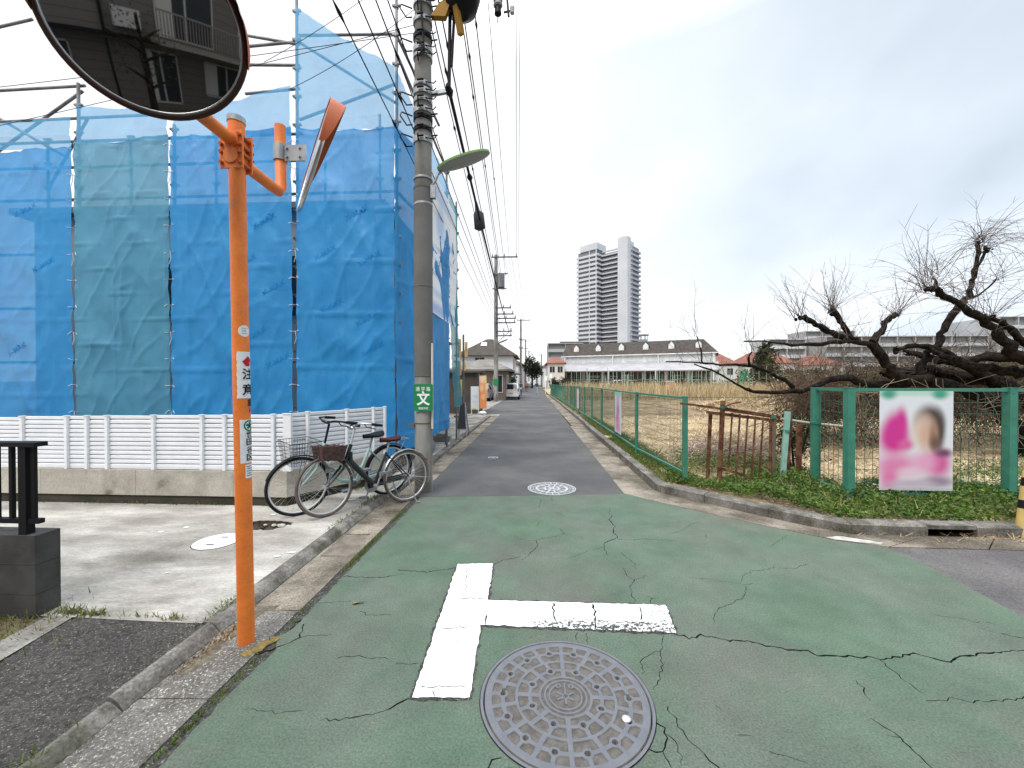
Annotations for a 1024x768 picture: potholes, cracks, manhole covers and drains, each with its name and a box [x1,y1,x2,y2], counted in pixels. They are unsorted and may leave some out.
crack [251,698,409,722]
manhole cover [190,533,235,550]
manhole cover [480,640,657,768]
crack [642,708,719,768]
crack [256,618,331,655]
crack [856,681,932,768]
pothole [253,520,293,530]
manhole cover [528,482,576,495]
crack [640,564,1024,703]
crack [500,513,690,643]
crack [344,568,487,696]
